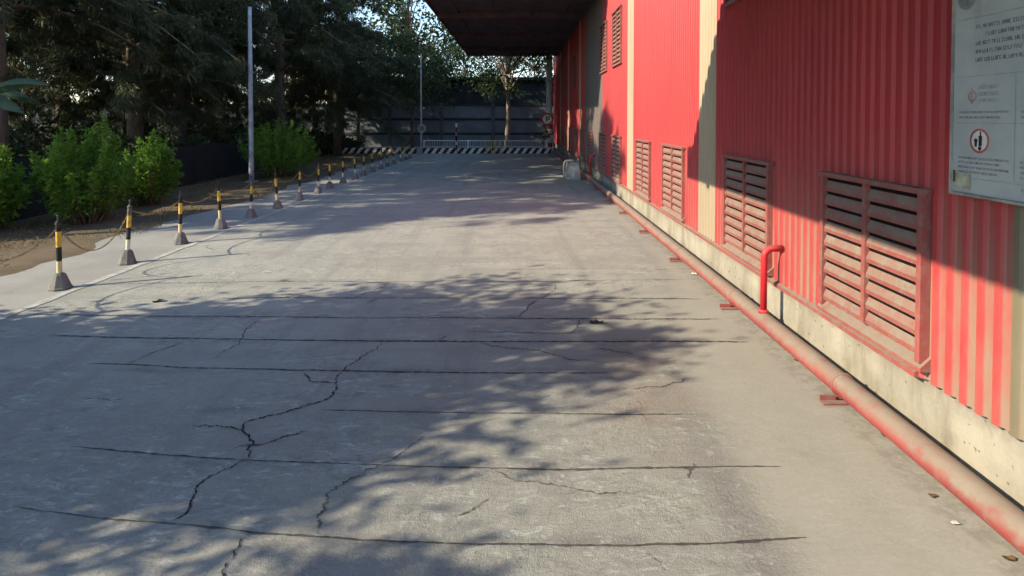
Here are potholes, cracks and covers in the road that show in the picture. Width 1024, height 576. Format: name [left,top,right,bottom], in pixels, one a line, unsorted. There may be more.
crack [316,437,422,533]
crack [172,343,382,576]
crack [489,467,632,494]
